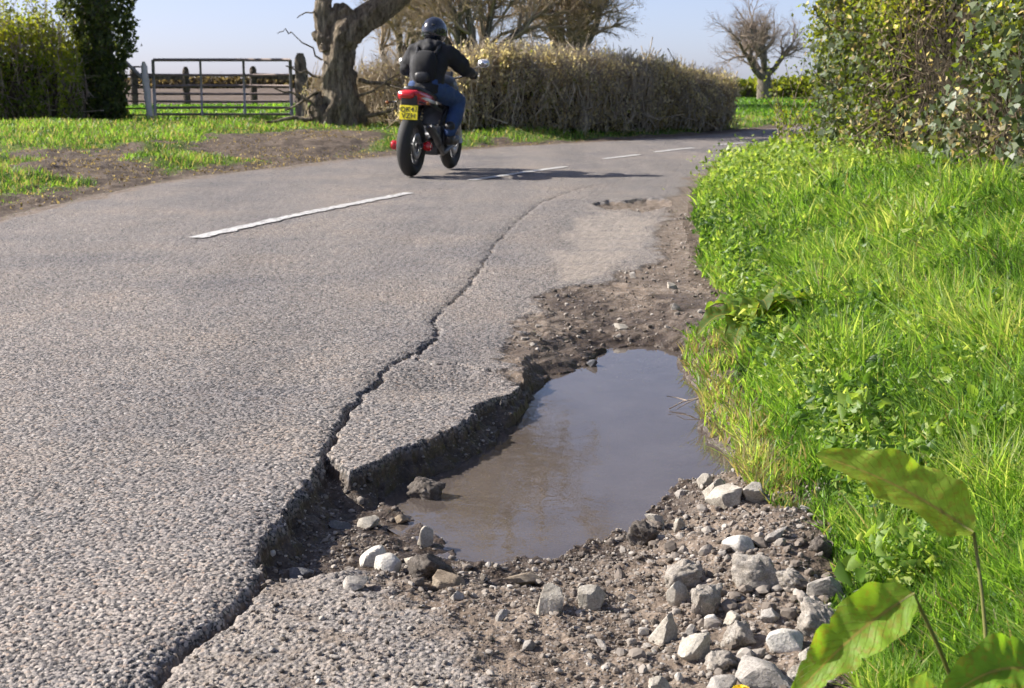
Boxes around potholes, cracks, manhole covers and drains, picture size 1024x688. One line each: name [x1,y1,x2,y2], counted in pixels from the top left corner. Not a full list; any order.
crack [314,182,618,470]
pothole [252,282,758,628]
crack [130,572,272,688]
